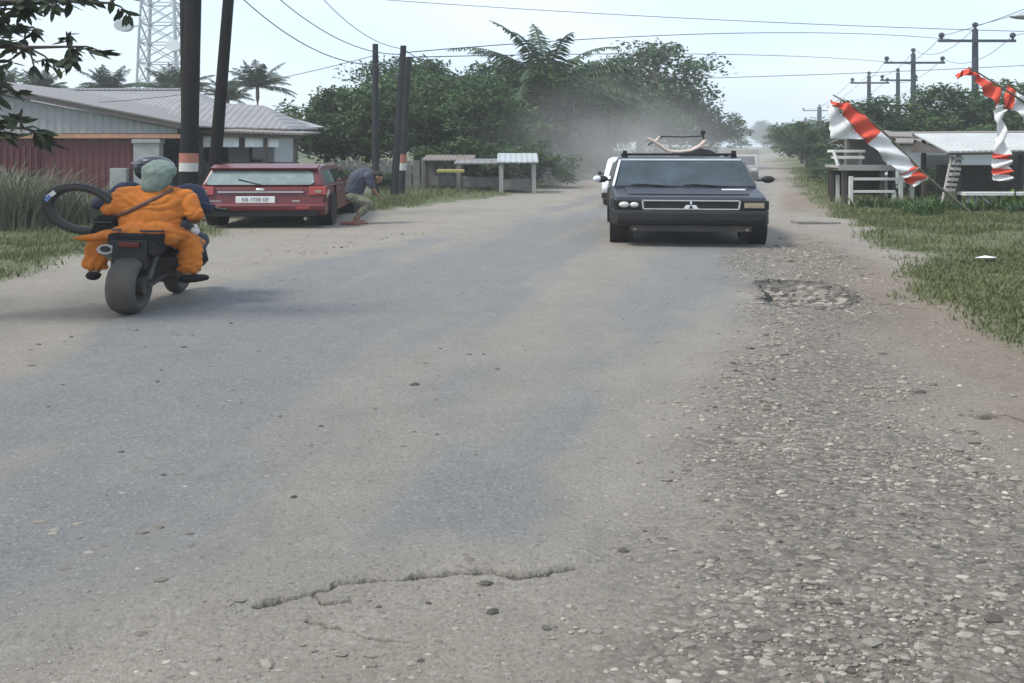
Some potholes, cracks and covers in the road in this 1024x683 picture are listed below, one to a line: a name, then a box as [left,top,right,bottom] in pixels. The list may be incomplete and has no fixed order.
pothole [752,278,864,311]
crack [237,556,591,654]
